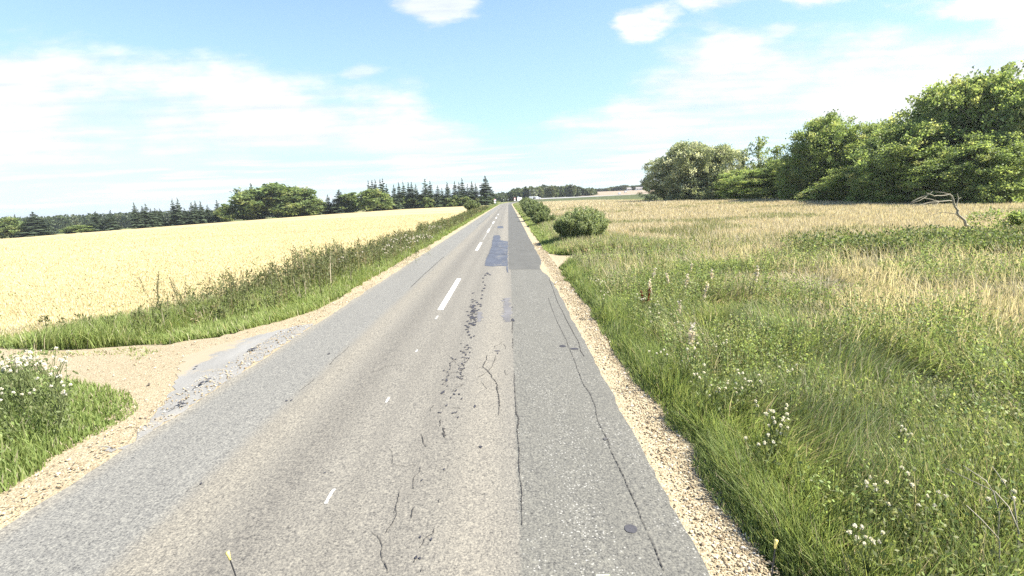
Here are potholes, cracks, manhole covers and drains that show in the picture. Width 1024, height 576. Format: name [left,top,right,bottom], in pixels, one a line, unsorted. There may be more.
crack [443,346,506,415]
crack [372,447,421,571]
crack [569,348,664,570]
crack [548,279,584,356]
